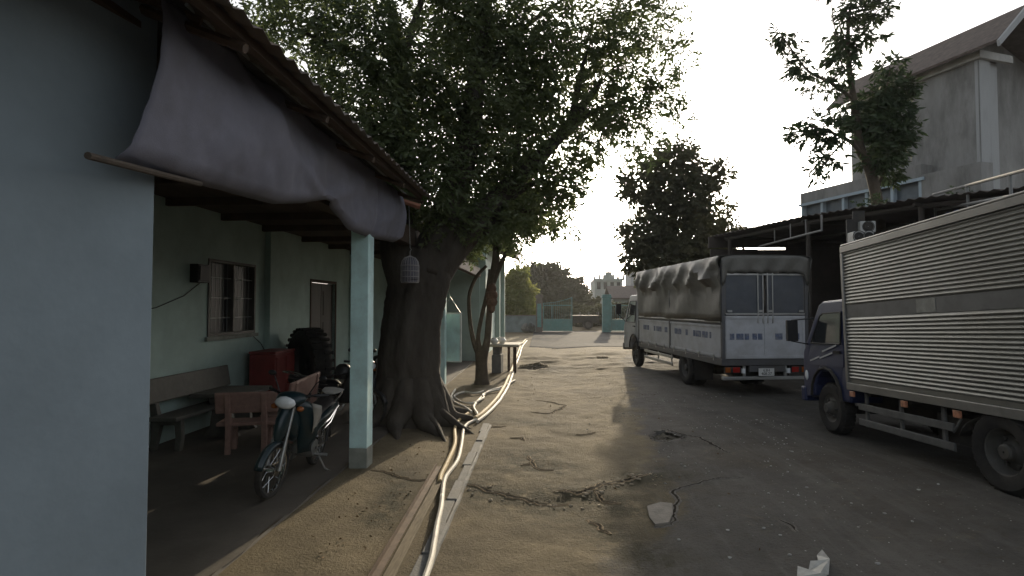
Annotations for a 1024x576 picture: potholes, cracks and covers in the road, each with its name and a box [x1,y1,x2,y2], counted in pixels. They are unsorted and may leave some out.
crack [467,426,744,535]
crack [371,470,426,481]
pothole [517,361,550,371]
crack [776,519,798,532]
pothole [649,429,689,442]
crack [530,400,568,414]
